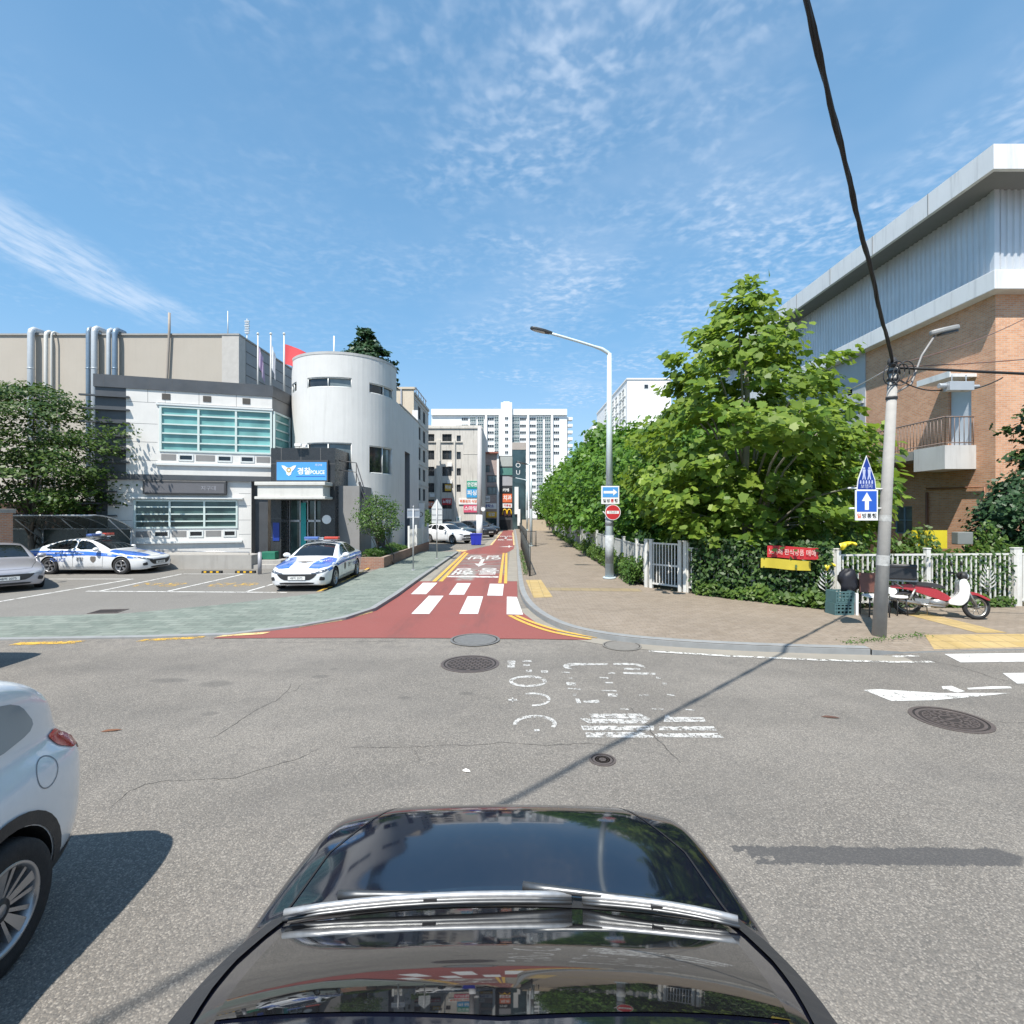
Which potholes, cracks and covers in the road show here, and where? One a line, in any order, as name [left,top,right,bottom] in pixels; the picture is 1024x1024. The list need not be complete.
manhole cover [602,641,642,651]
manhole cover [441,655,499,673]
manhole cover [908,706,996,734]
crack [118,750,315,801]
manhole cover [589,753,616,767]
manhole cover [450,633,500,646]
